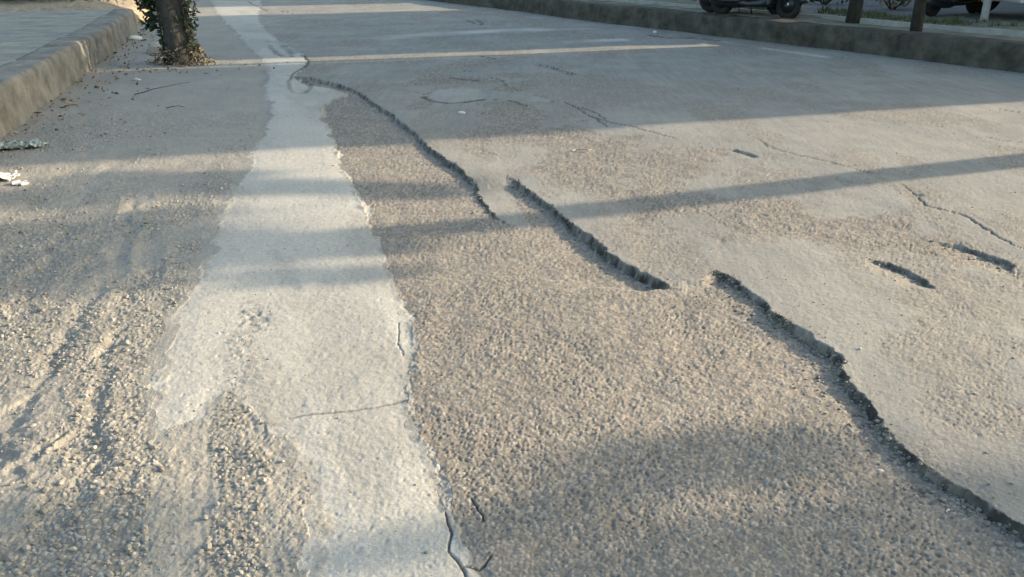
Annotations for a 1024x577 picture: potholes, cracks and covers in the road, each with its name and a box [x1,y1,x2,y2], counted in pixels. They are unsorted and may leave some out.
crack [547,101,678,139]
crack [445,499,492,577]
crack [902,184,1023,249]
crack [419,57,528,107]
crack [289,400,409,419]
